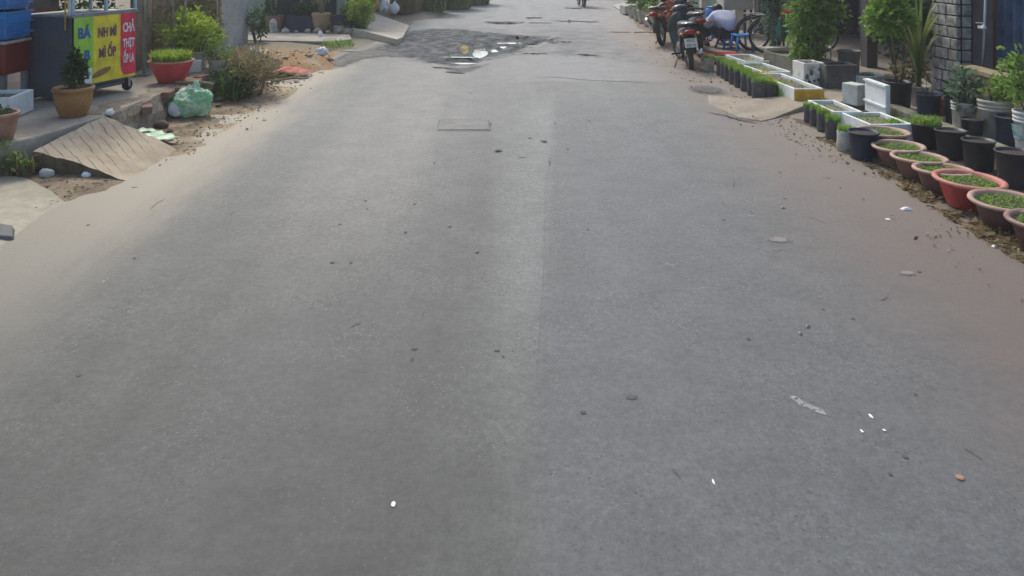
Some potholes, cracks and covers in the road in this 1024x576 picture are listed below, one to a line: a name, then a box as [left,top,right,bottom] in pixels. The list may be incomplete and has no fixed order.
manhole cover [436,119,491,131]
